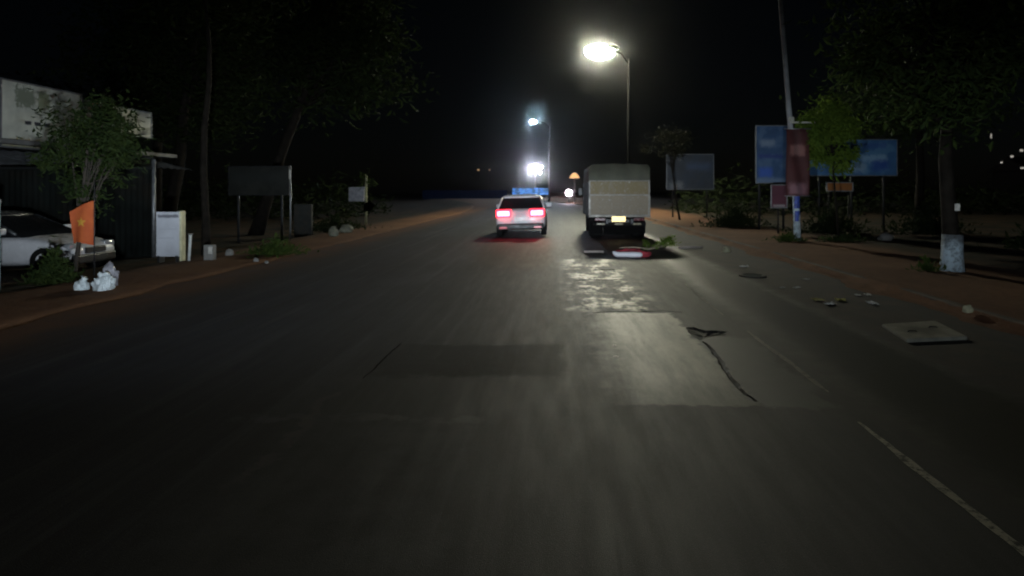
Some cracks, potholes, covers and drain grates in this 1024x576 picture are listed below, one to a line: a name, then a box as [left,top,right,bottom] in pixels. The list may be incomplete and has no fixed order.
crack [363,343,402,378]
crack [702,341,757,402]
manhole cover [882,321,967,343]
